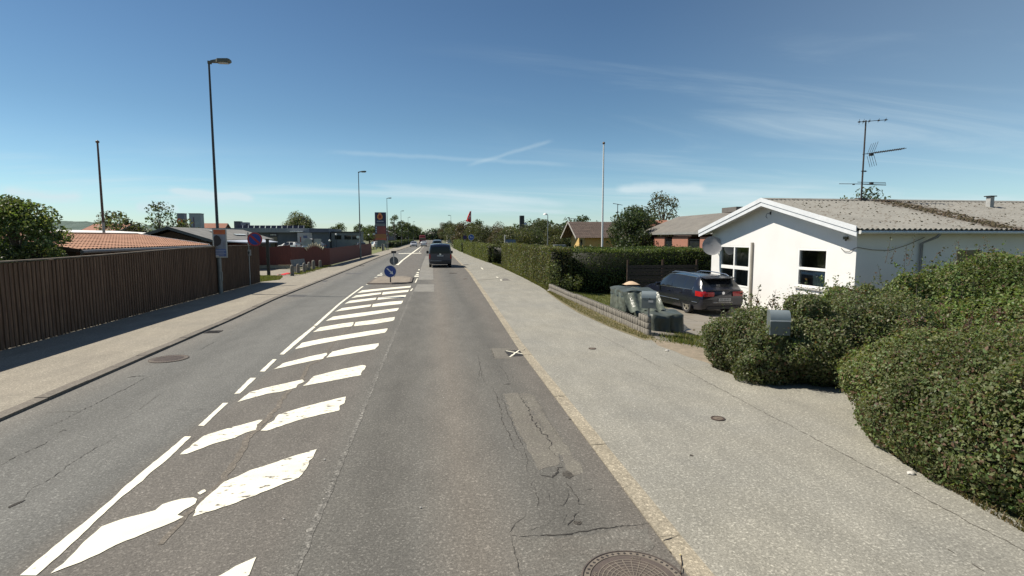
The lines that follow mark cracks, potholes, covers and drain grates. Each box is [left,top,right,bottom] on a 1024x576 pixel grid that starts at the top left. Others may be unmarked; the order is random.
crack [8,438,114,508]
manhole cover [581,550,684,576]
crack [5,367,189,463]
manhole cover [148,355,189,363]
crack [478,347,648,571]
